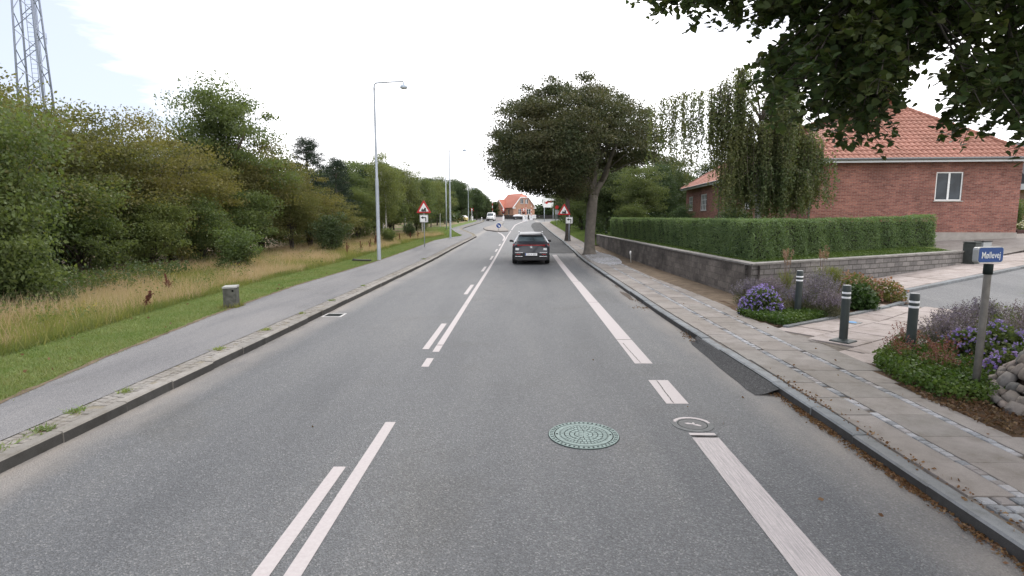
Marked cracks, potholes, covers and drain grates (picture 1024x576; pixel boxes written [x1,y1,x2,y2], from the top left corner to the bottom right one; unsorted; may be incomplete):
manhole cover [672,417,714,432]
manhole cover [548,422,620,450]
